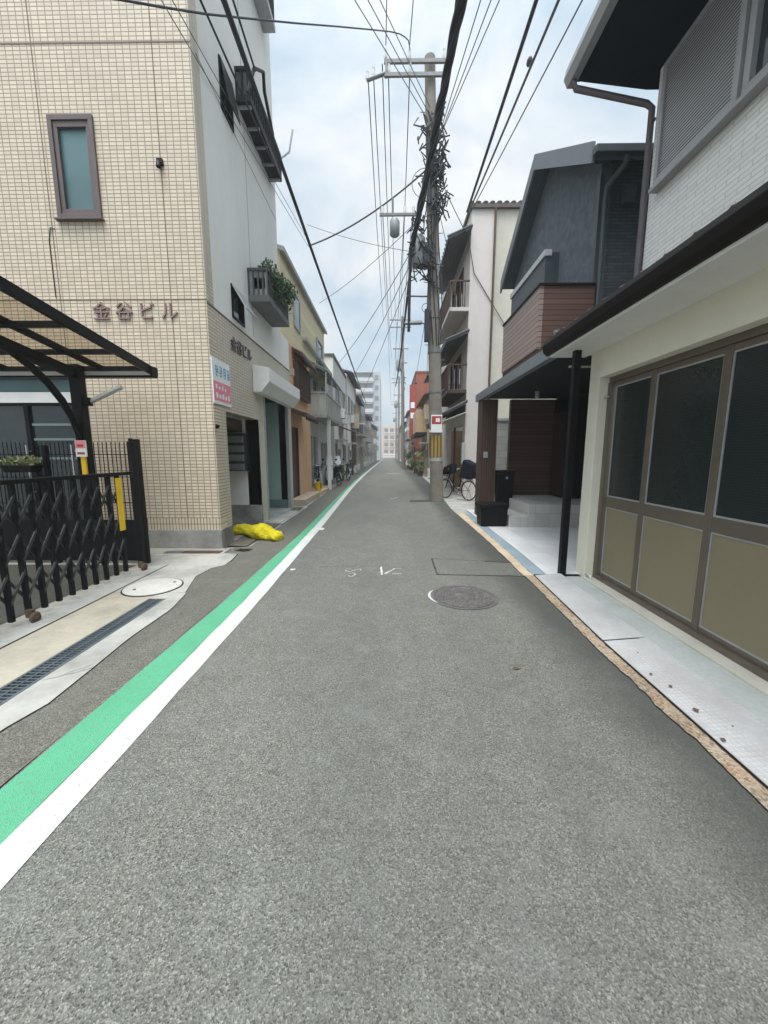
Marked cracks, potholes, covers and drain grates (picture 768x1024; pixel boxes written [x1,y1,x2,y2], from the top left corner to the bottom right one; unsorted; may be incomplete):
drain grate [0,598,165,706]
manhole cover [120,578,184,597]
manhole cover [428,585,498,610]
